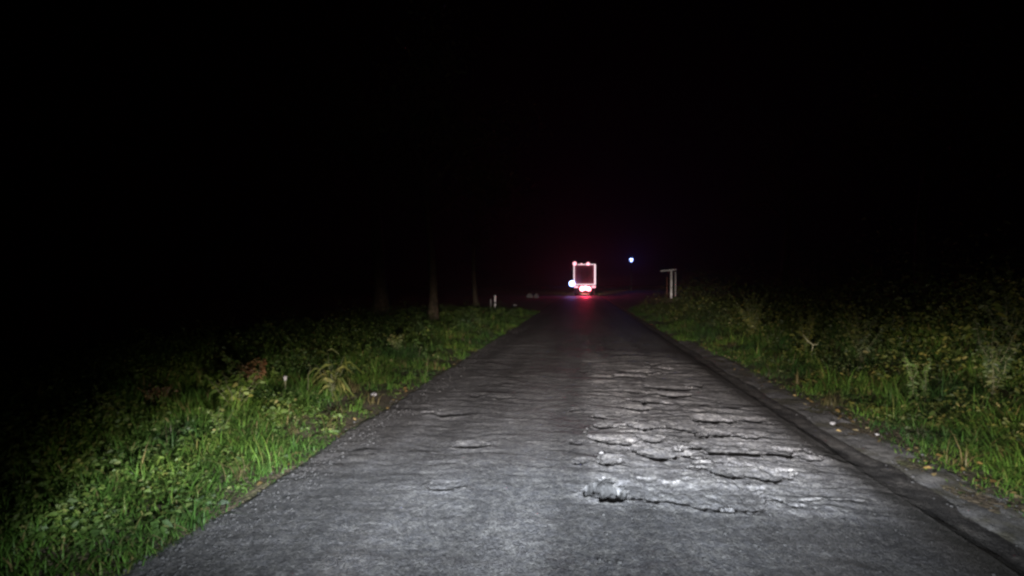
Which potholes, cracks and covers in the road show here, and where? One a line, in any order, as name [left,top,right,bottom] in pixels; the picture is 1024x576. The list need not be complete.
pothole [582,478,627,503]
pothole [428,478,467,491]
pothole [454,440,491,449]
pothole [421,409,476,418]
